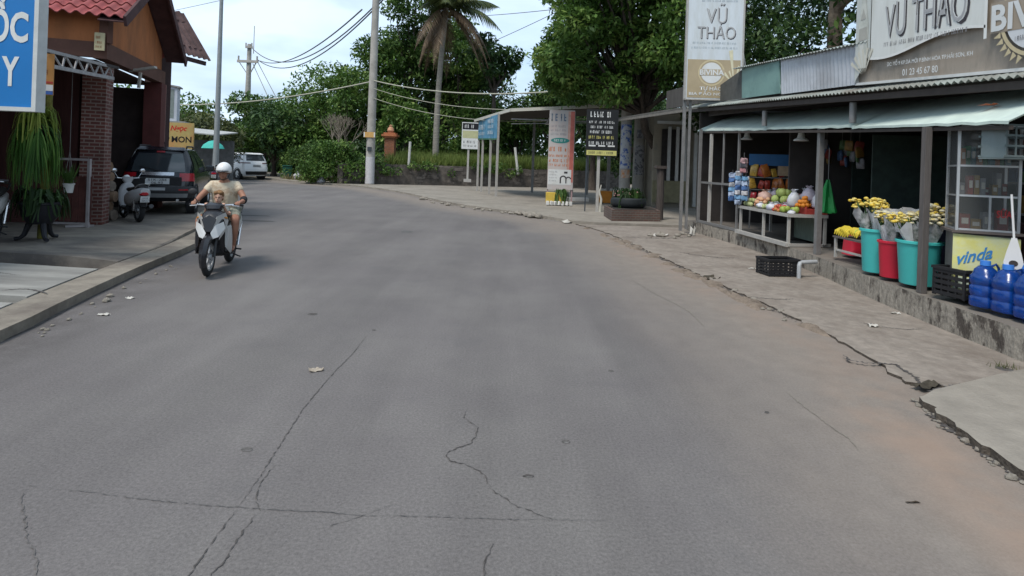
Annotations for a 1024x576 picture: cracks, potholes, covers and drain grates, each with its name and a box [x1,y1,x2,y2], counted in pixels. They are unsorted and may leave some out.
crack [843,354,921,383]
crack [188,340,363,576]
crack [445,416,552,519]
crack [622,236,797,321]
crack [909,400,1024,481]
crack [20,491,39,575]
